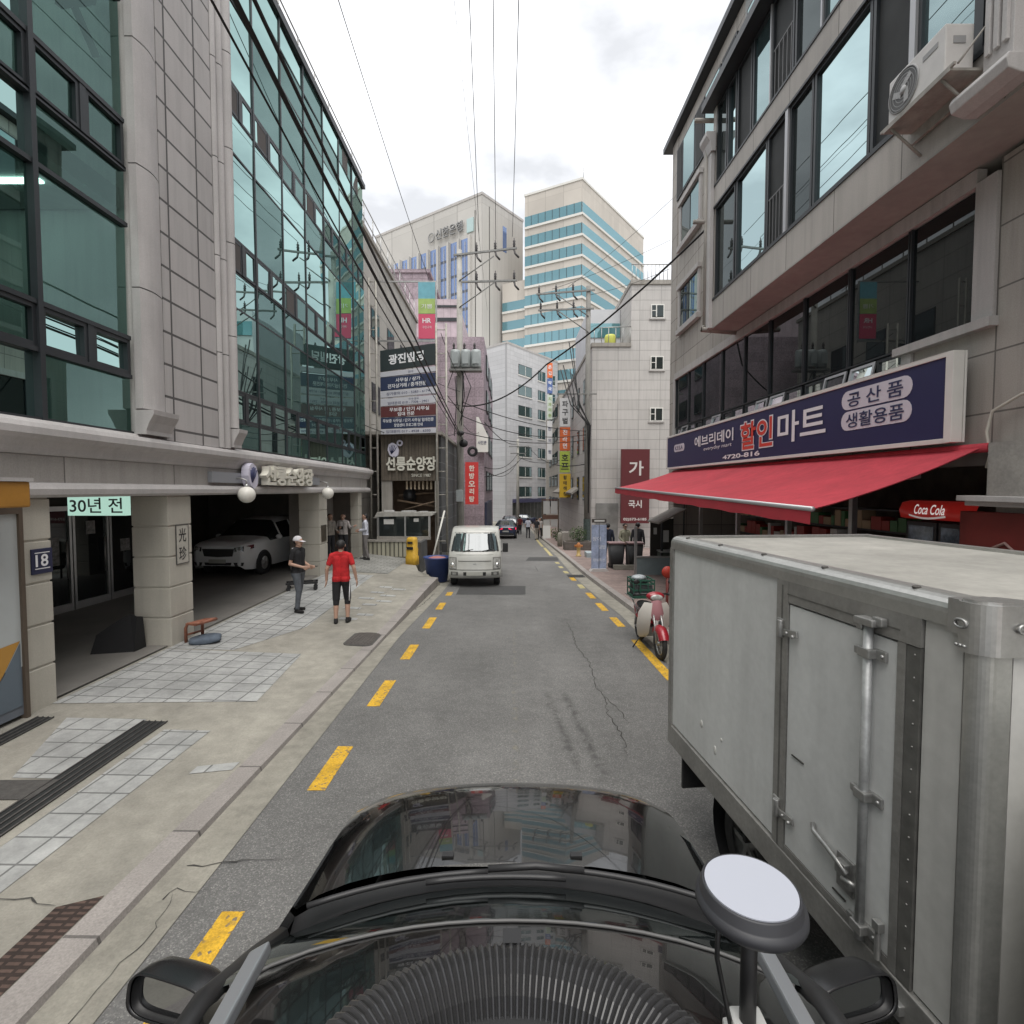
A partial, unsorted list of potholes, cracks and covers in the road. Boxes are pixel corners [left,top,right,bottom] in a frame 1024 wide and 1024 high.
crack [567,623,629,753]
crack [68,887,210,1024]
crack [187,856,301,867]
manhole cover [343,632,381,646]
crack [0,897,51,905]
